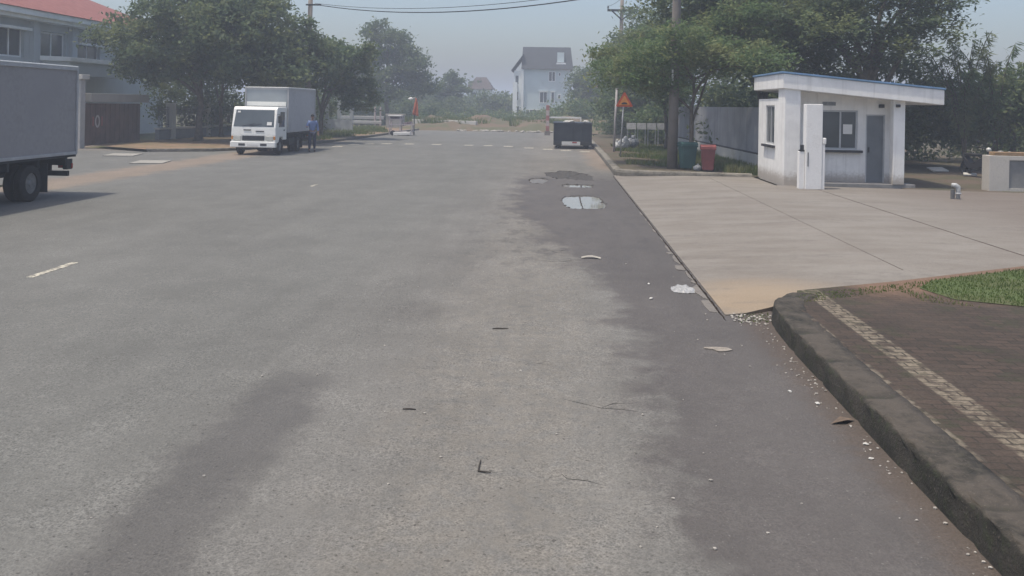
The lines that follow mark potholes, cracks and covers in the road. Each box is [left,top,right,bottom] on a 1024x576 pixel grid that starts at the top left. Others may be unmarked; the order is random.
pothole [545,170,594,181]
pothole [560,195,607,209]
